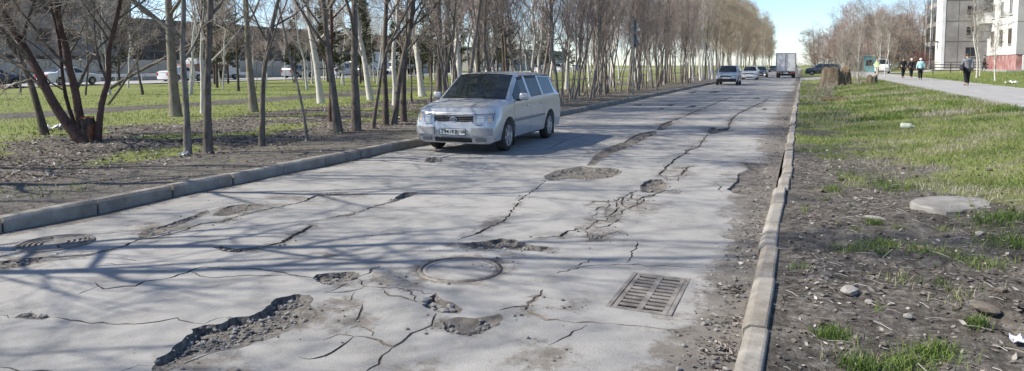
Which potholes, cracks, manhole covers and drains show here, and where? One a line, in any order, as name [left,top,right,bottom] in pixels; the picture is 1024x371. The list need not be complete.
pothole [152,294,320,371]
manhole cover [13,234,96,253]
pothole [640,179,667,193]
pothole [544,166,623,181]
pothole [458,238,550,252]
crack [5,315,231,325]
drain grate [605,272,691,317]
pothole [442,314,503,335]
pothole [138,210,210,239]
crack [501,134,728,345]
pothole [313,272,361,285]
manhole cover [417,257,502,283]
